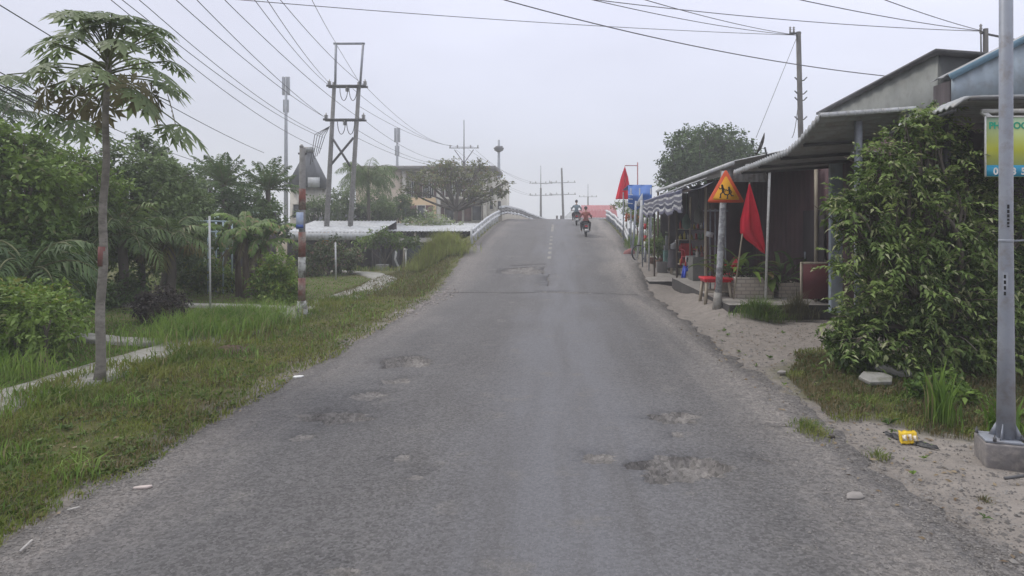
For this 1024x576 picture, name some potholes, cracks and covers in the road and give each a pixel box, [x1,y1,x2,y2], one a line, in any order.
pothole [646,412,702,424]
pothole [349,392,388,401]
pothole [623,455,738,486]
pothole [501,267,545,275]
pothole [581,454,618,465]
pothole [295,412,376,426]
pothole [379,356,433,369]
